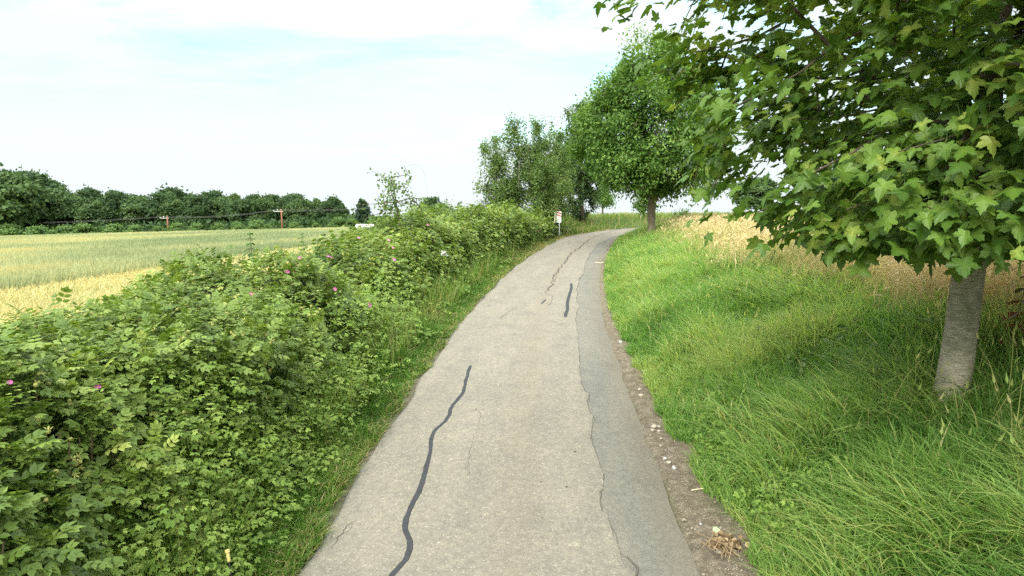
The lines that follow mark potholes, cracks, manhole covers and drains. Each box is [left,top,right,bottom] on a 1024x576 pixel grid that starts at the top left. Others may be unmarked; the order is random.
crack [545,229,620,305]
